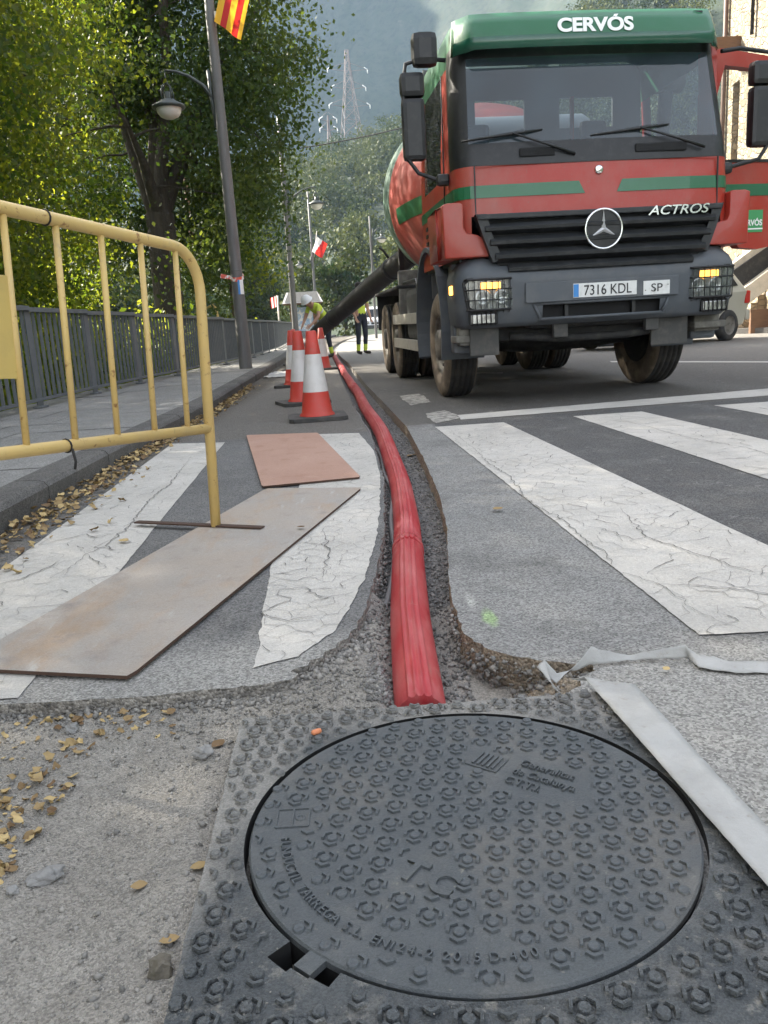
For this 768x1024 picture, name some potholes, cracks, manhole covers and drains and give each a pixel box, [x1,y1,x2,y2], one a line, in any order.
manhole cover [164,689,768,1024]
